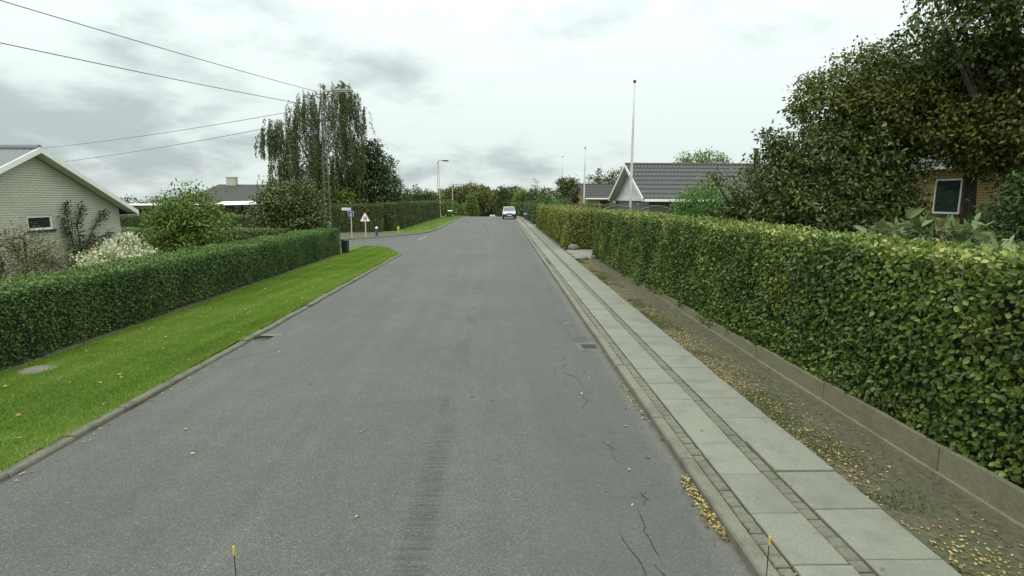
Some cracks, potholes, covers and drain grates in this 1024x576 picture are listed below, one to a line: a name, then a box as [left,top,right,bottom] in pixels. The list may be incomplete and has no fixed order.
crack [619,491,665,576]
manhole cover [17,365,57,375]
